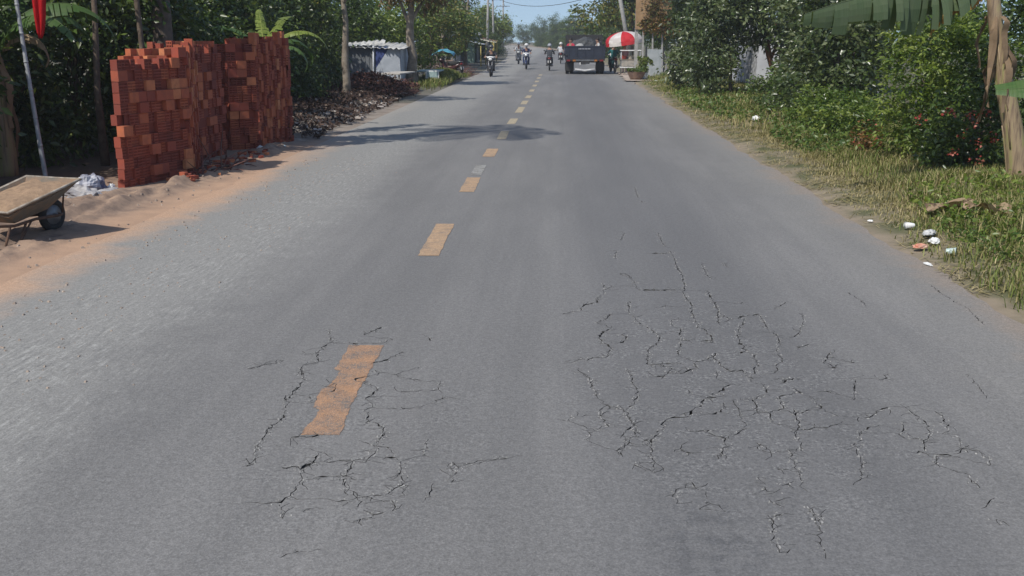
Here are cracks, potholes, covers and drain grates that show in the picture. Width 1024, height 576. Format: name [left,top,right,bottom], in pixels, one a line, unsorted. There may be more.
crack [563,187,1009,559]
crack [239,326,520,558]
